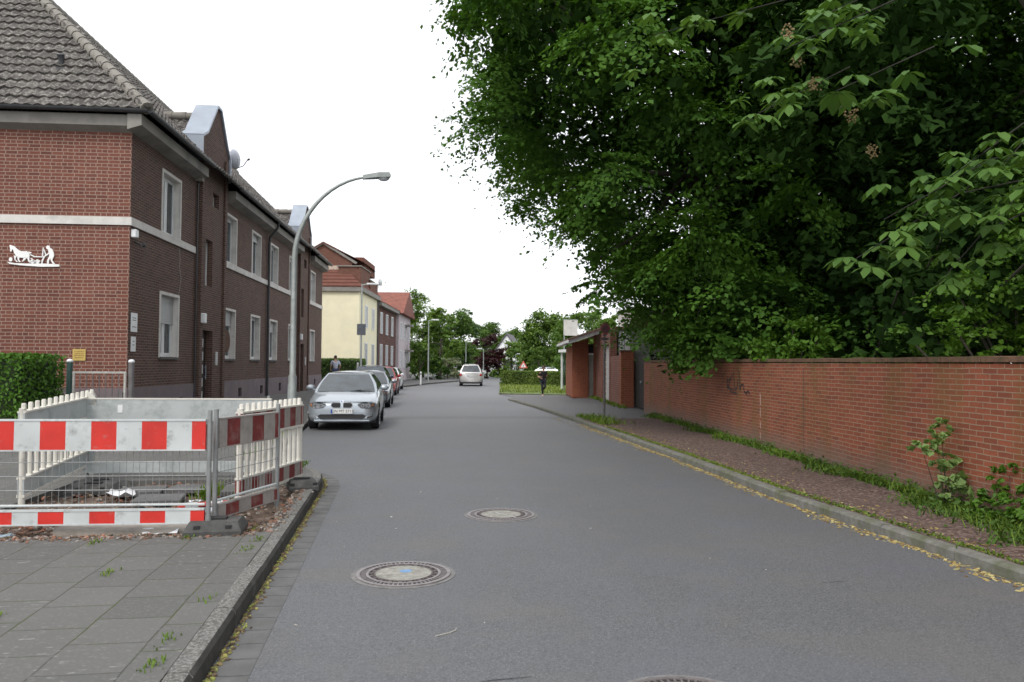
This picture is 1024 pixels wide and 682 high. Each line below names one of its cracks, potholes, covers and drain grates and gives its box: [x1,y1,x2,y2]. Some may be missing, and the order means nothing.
manhole cover [464,508,538,522]
manhole cover [351,561,455,589]
